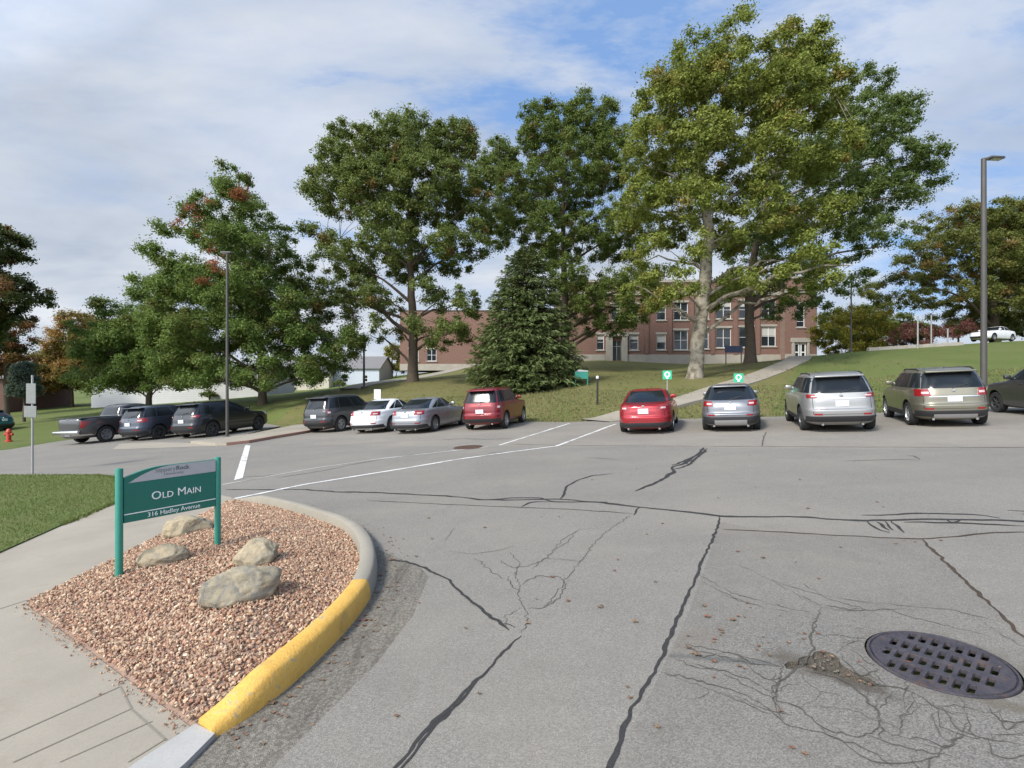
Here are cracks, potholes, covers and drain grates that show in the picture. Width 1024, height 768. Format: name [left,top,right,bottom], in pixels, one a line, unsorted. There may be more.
crack [446,515,630,629]
manhole cover [866,631,1024,699]
crack [664,565,1024,768]
pothole [784,650,879,687]
